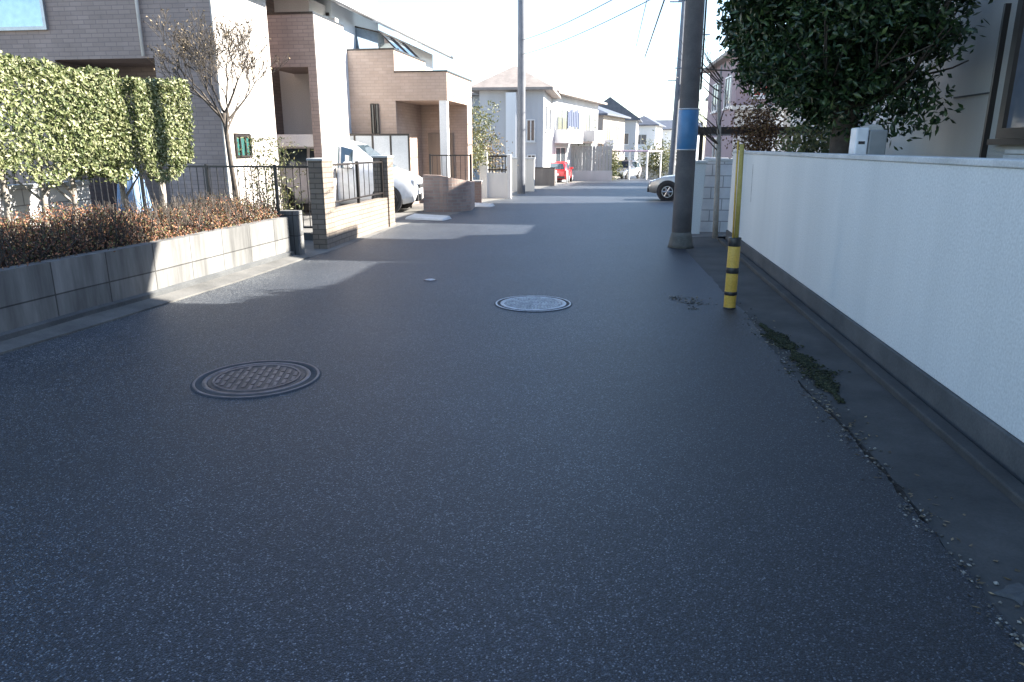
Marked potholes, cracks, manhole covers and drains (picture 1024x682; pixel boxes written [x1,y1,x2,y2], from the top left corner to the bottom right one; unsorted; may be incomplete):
crack [798,381,925,522]
manhole cover [190,360,322,399]
manhole cover [494,295,572,312]
